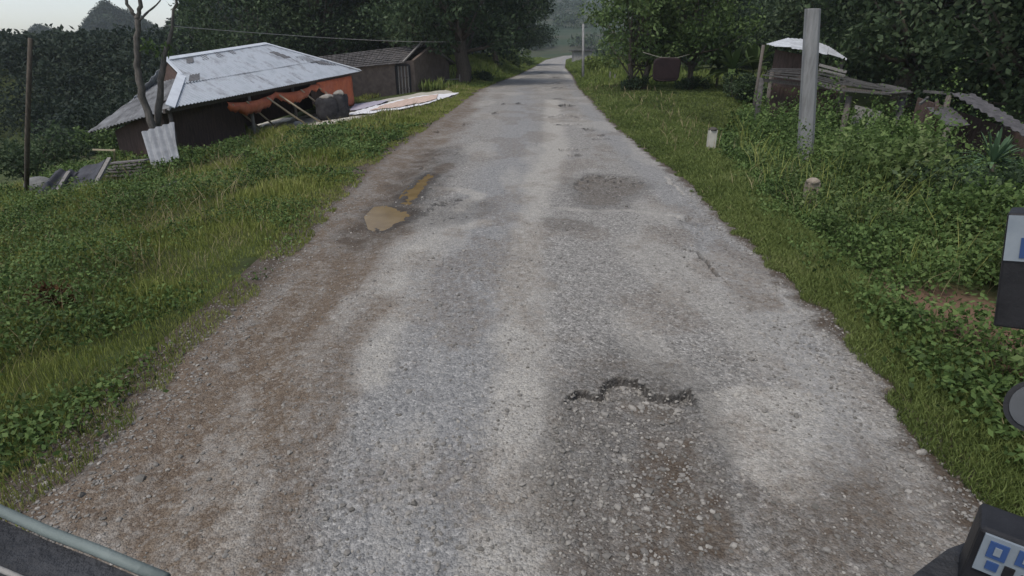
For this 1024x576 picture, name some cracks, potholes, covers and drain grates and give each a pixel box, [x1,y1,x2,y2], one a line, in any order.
pothole [378,206,420,231]
crack [683,249,721,277]
pothole [571,174,648,210]
pothole [397,172,438,205]
